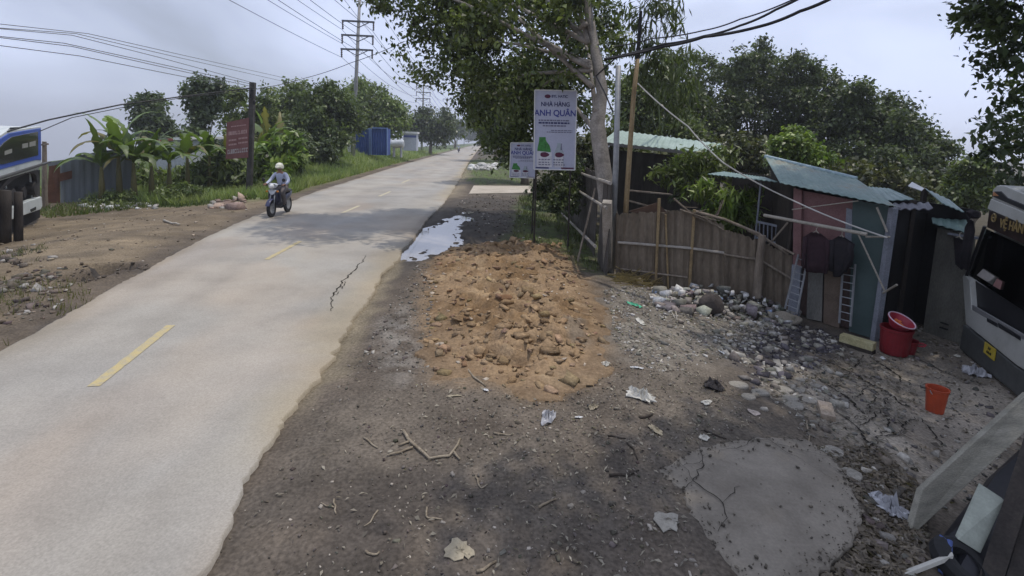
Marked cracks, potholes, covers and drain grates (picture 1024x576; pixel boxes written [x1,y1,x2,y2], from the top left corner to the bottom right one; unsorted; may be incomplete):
crack [330,257,365,310]
